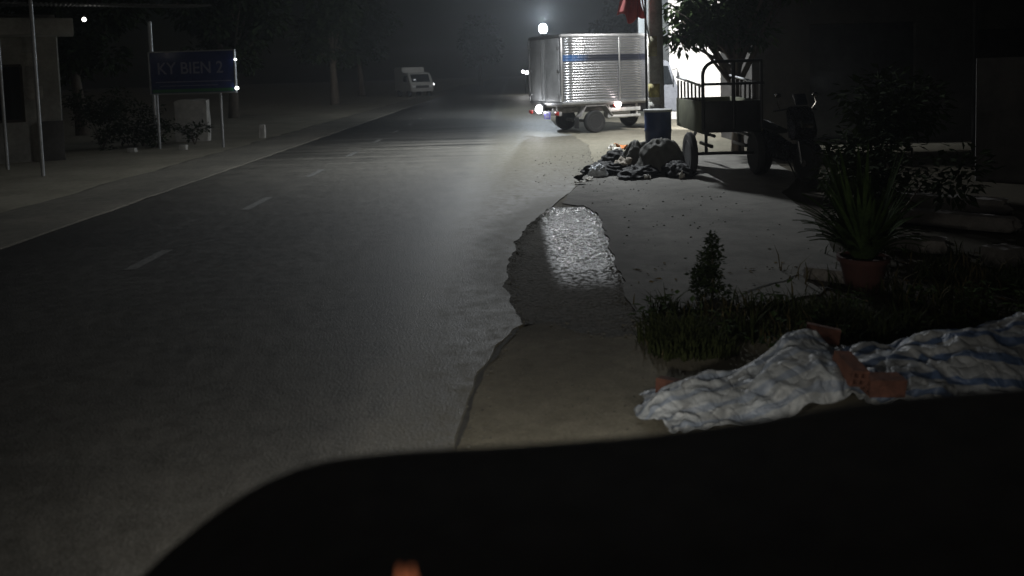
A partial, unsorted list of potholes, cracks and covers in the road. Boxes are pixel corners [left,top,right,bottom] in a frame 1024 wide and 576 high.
pothole [503,206,637,338]
